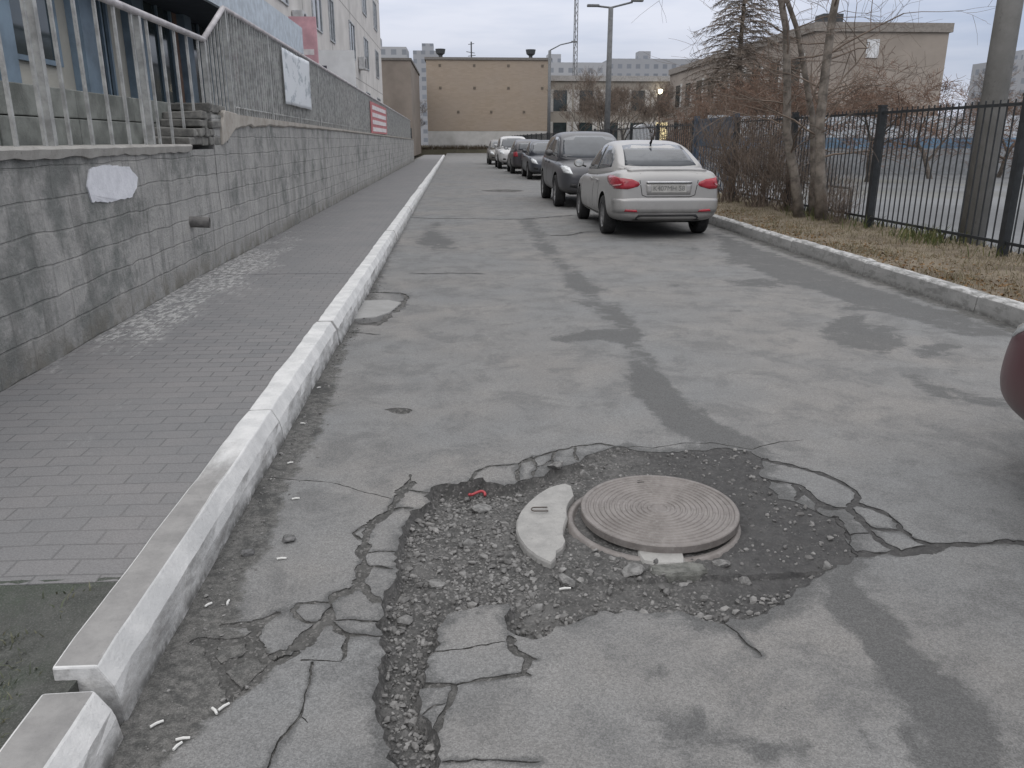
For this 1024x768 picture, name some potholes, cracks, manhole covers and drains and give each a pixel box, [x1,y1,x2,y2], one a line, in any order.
crack [468,440,1024,558]
crack [723,623,762,657]
pothole [372,446,858,768]
manhole cover [567,475,741,562]
crack [189,474,537,768]
